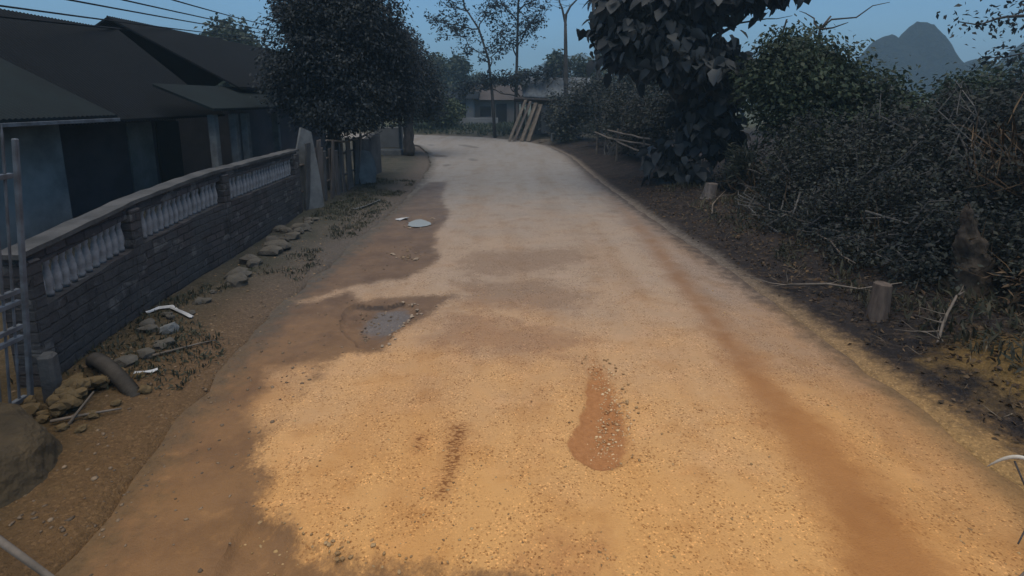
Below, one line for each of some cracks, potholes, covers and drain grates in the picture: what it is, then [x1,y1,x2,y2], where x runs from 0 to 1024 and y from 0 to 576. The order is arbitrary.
pothole [339,301,423,351]
pothole [565,354,642,471]
